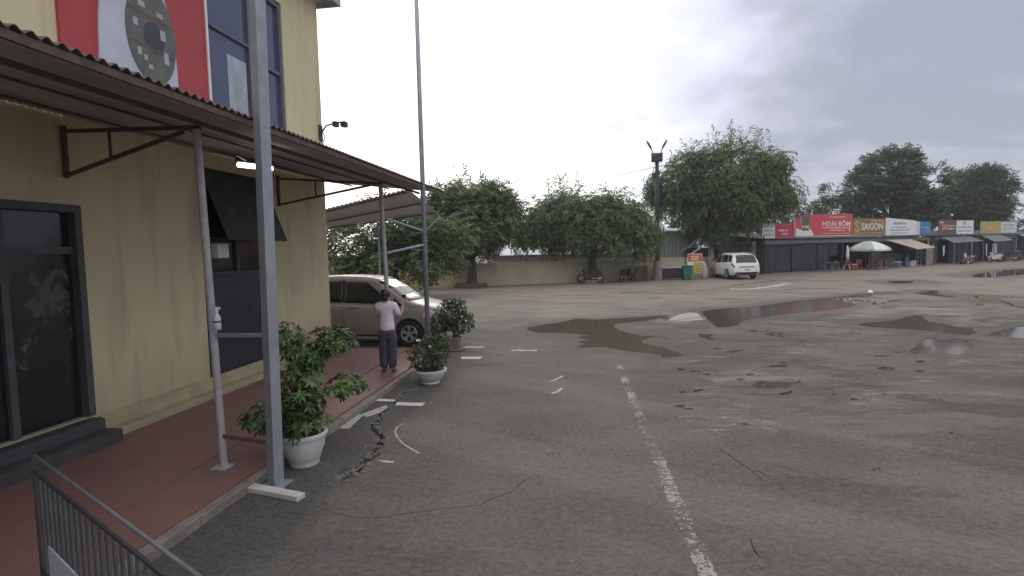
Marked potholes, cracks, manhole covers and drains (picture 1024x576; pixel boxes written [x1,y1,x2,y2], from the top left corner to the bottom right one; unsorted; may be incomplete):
crack [336,389,422,480]
crack [717,447,771,481]
crack [332,477,530,518]
pothole [909,338,973,355]
pothole [750,380,801,390]
pothole [858,314,977,335]
